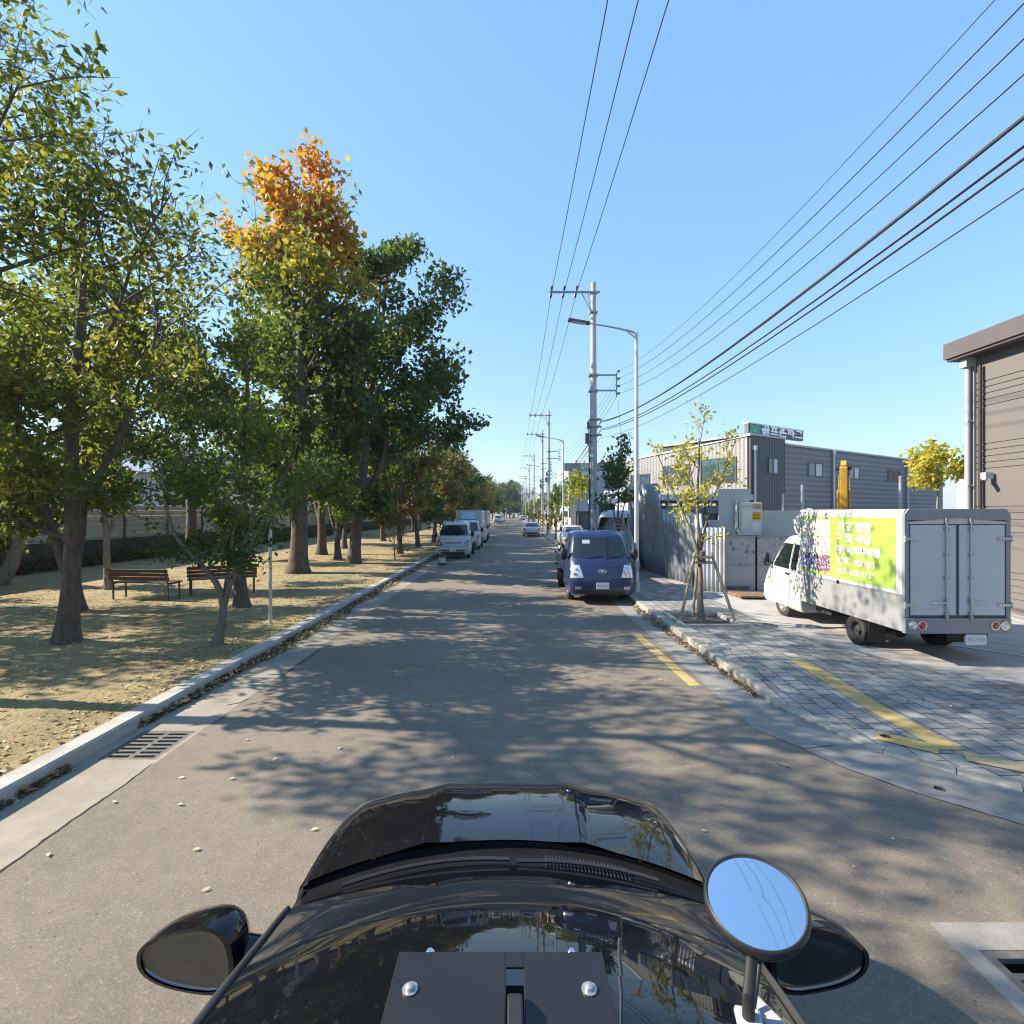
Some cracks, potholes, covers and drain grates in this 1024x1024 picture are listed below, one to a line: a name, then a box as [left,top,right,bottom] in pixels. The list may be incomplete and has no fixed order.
drain grate [980,951,1024,993]
drain grate [98,731,196,760]
